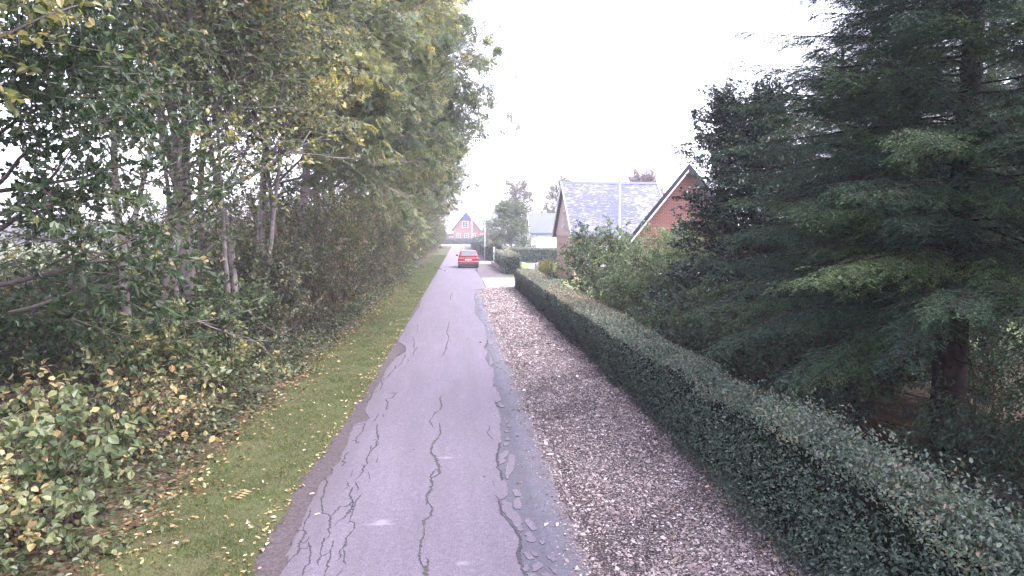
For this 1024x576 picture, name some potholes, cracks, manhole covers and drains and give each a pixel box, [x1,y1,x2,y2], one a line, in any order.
crack [286,327,418,576]
crack [418,397,442,576]
crack [487,426,526,576]
